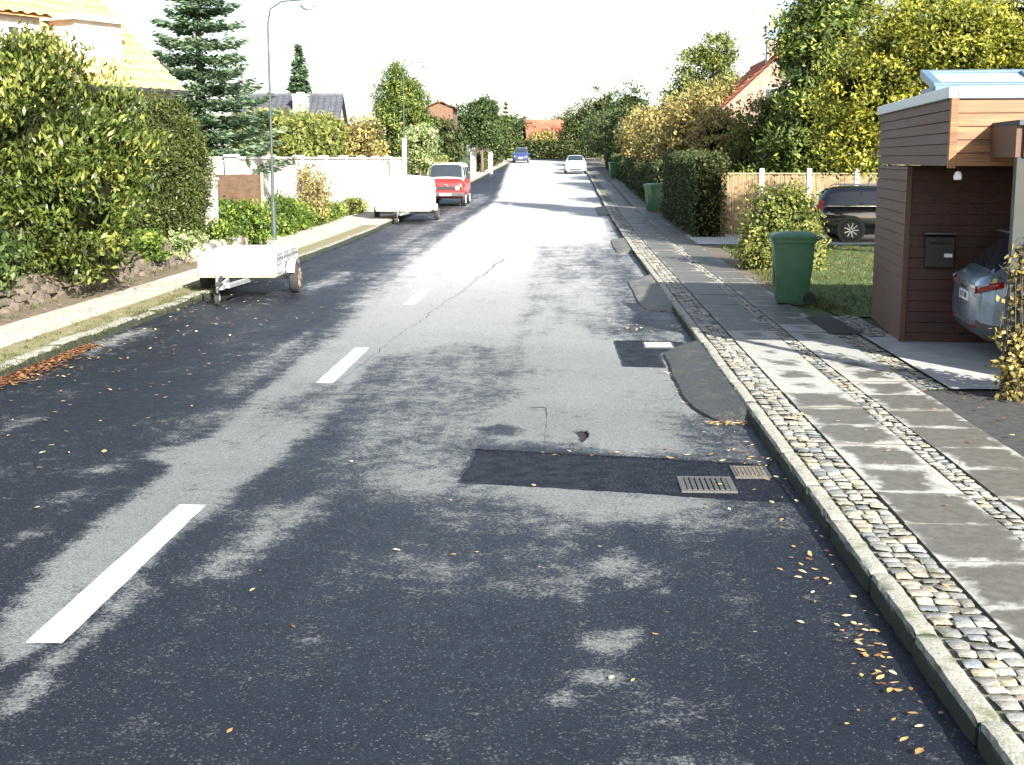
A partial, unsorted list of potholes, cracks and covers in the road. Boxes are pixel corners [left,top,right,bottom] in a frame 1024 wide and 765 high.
pothole [573,429,590,443]
drain grate [676,476,738,493]
crack [260,259,504,438]
